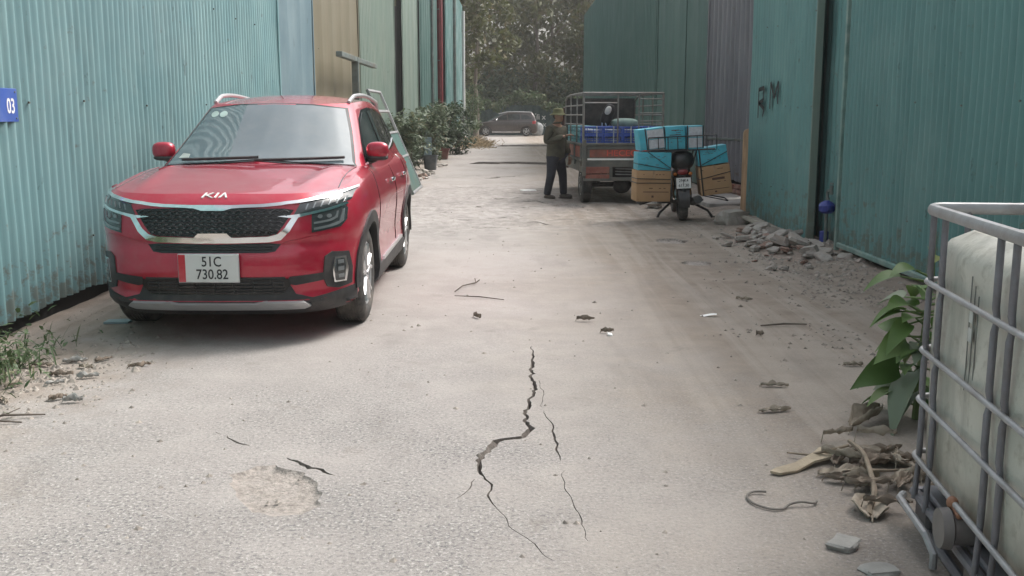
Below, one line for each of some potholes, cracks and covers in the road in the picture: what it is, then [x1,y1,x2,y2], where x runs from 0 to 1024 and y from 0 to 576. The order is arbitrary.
crack [456,346,588,560]
pothole [229,465,322,517]
crack [287,458,333,475]
